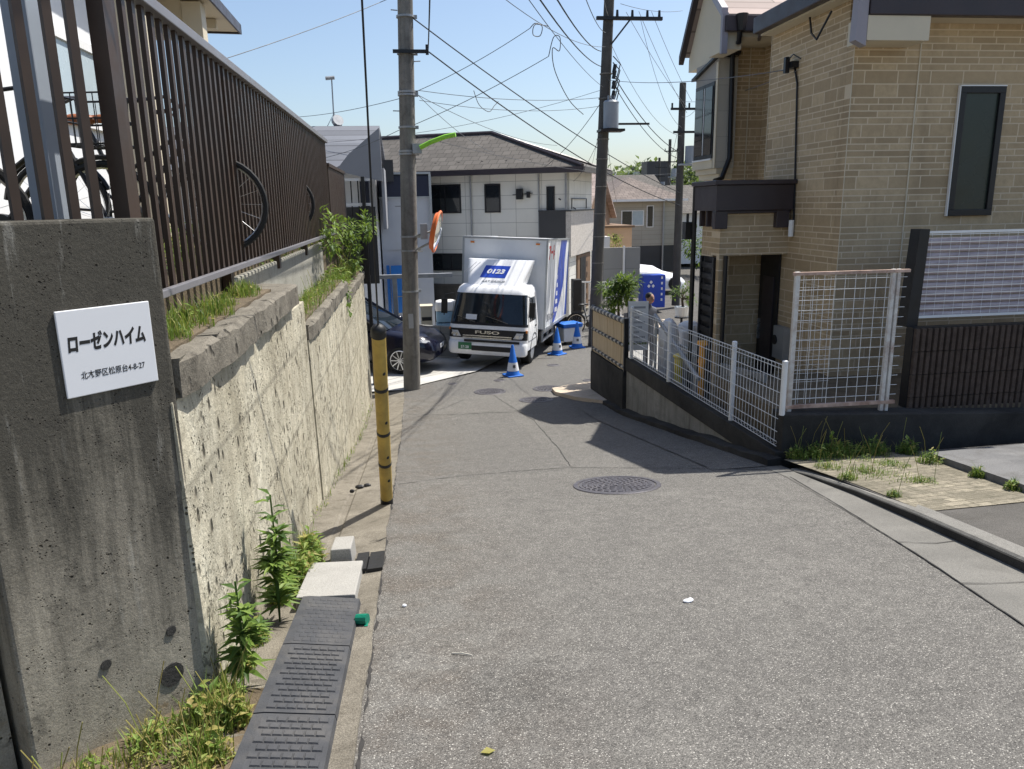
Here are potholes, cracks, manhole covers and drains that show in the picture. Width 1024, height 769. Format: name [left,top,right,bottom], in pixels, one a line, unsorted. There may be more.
manhole cover [573,476,661,494]
